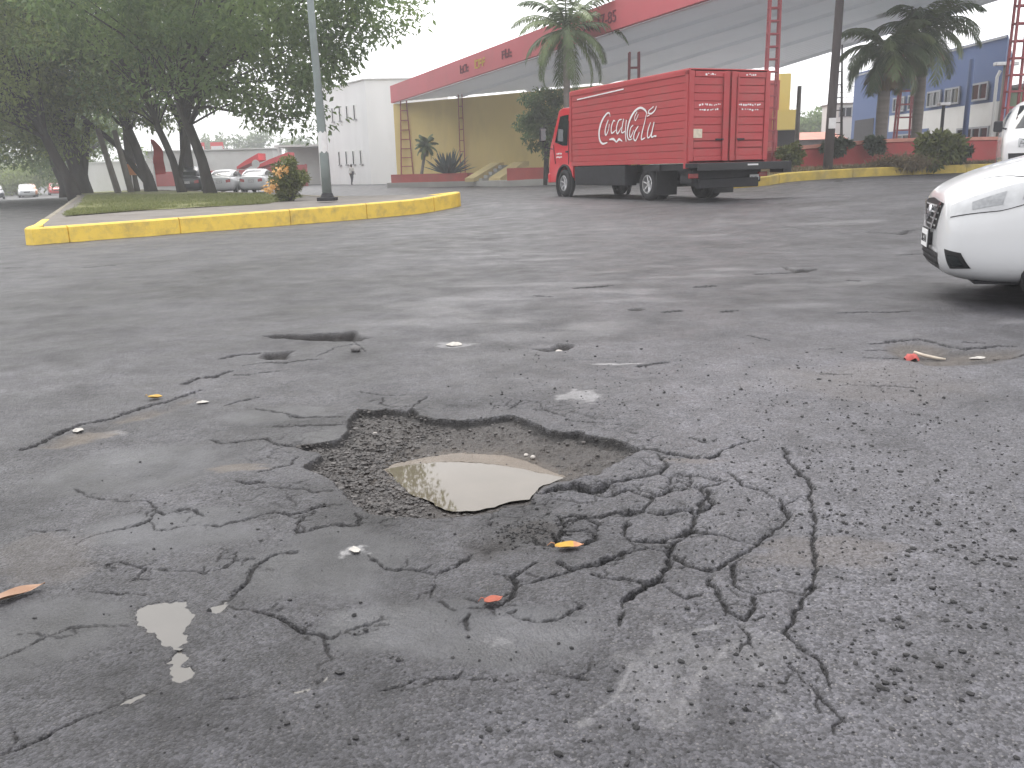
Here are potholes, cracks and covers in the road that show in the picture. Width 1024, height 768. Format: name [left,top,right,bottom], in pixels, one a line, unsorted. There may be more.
pothole [875,340,1024,368]
pothole [256,350,299,360]
crack [367,429,847,737]
pothole [527,343,578,352]
pothole [291,406,644,520]
pothole [260,330,378,342]
crack [17,341,489,693]
